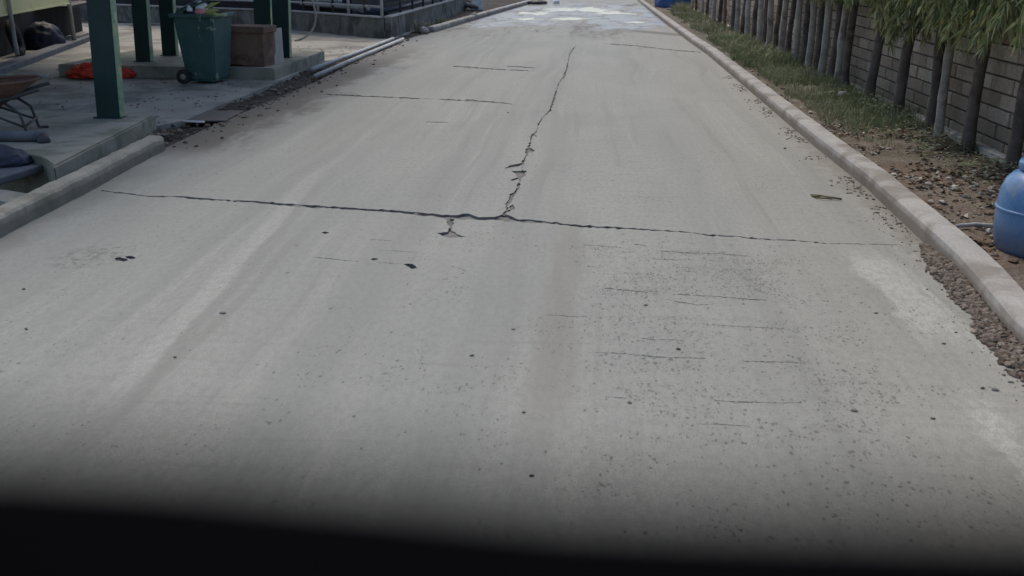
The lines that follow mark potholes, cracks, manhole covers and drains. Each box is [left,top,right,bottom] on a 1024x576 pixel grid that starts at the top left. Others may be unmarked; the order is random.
crack [604,288,761,305]
crack [611,44,695,52]
crack [101,46,888,264]
crack [595,323,791,359]
